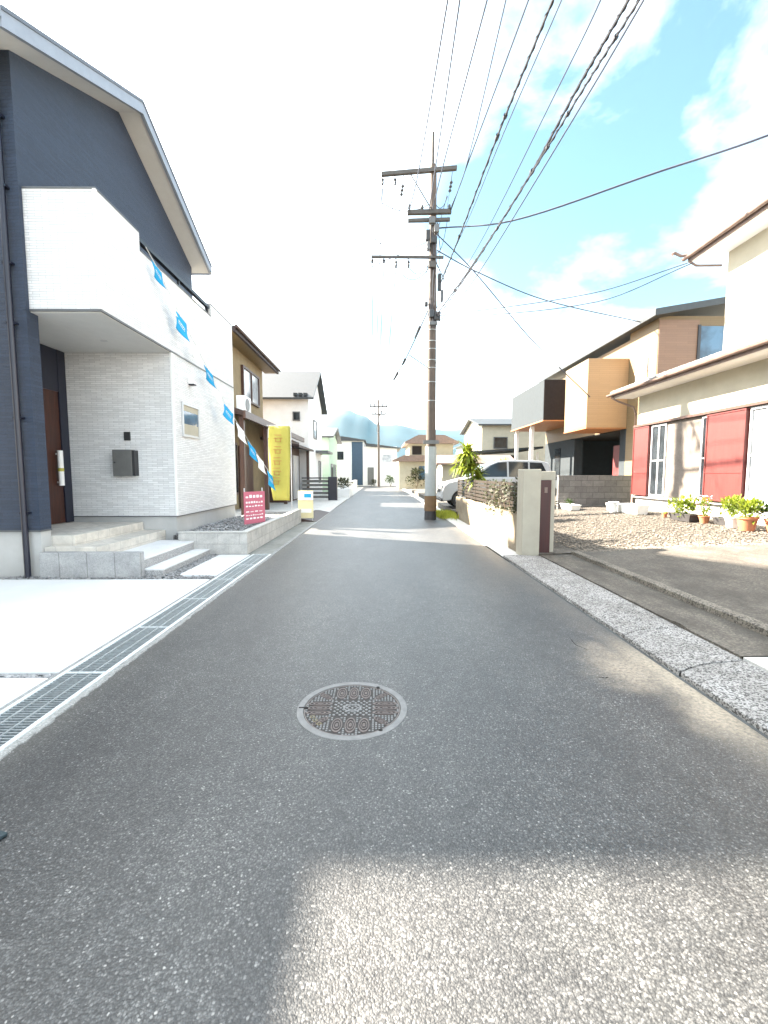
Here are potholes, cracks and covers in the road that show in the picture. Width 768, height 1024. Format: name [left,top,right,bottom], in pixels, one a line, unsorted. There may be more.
drain grate [236,554,271,565]
drain grate [214,565,256,579]
drain grate [64,627,171,673]
drain grate [136,598,210,627]
drain grate [183,579,237,599]
drain grate [0,672,108,752]
manhole cover [296,682,407,741]
